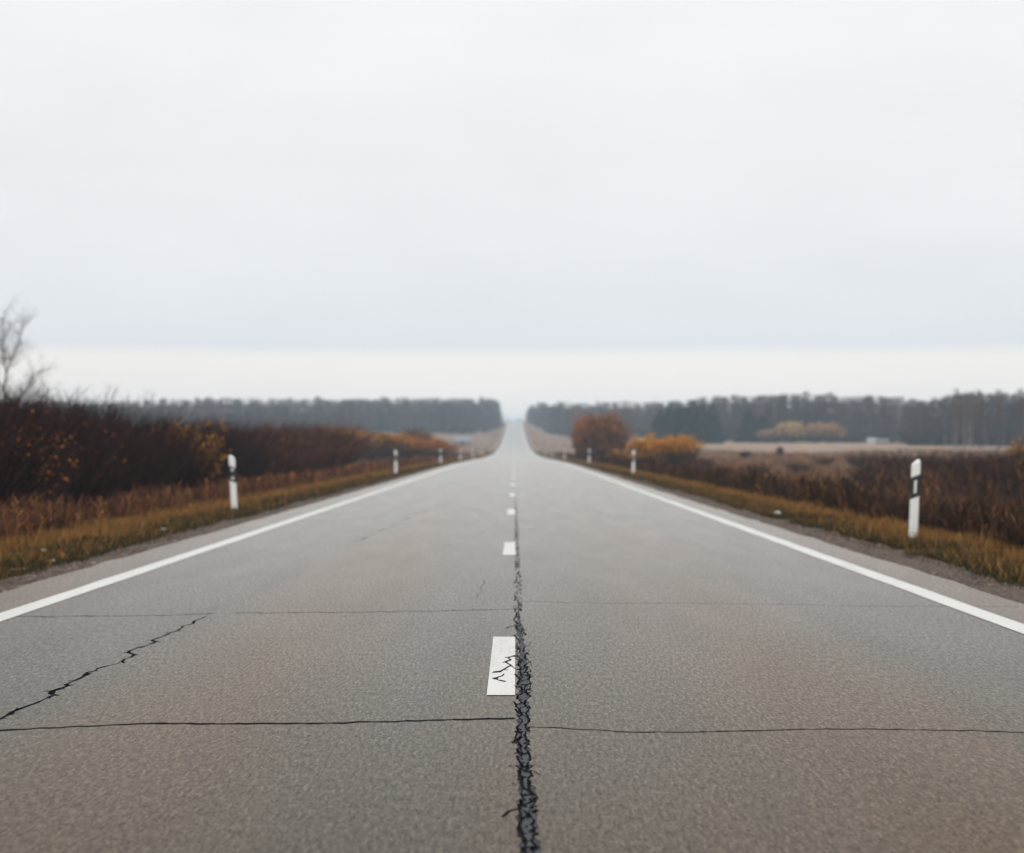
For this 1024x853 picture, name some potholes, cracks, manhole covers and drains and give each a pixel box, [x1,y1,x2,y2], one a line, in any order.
crack [0,492,1024,853]
